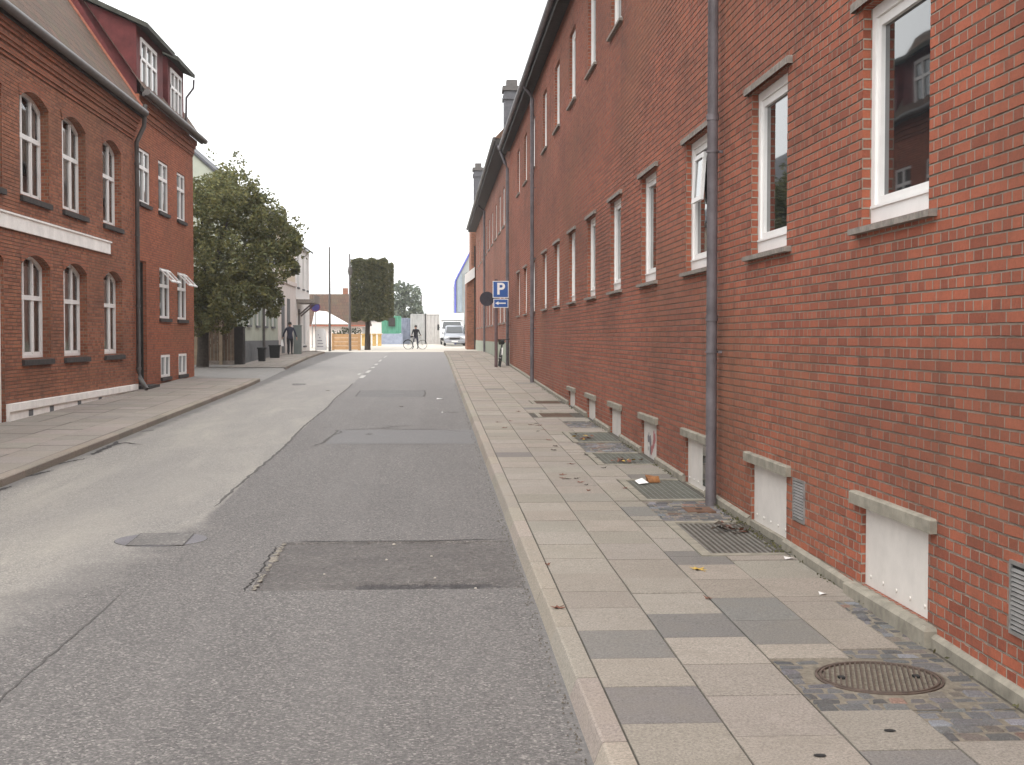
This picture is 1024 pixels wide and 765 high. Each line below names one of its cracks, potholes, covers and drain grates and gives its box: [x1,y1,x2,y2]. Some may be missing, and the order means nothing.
drain grate [617,479,705,501]
drain grate [585,452,655,466]
drain grate [562,432,621,443]
manhole cover [806,660,955,698]
drain grate [664,520,787,557]
manhole cover [114,533,208,547]
